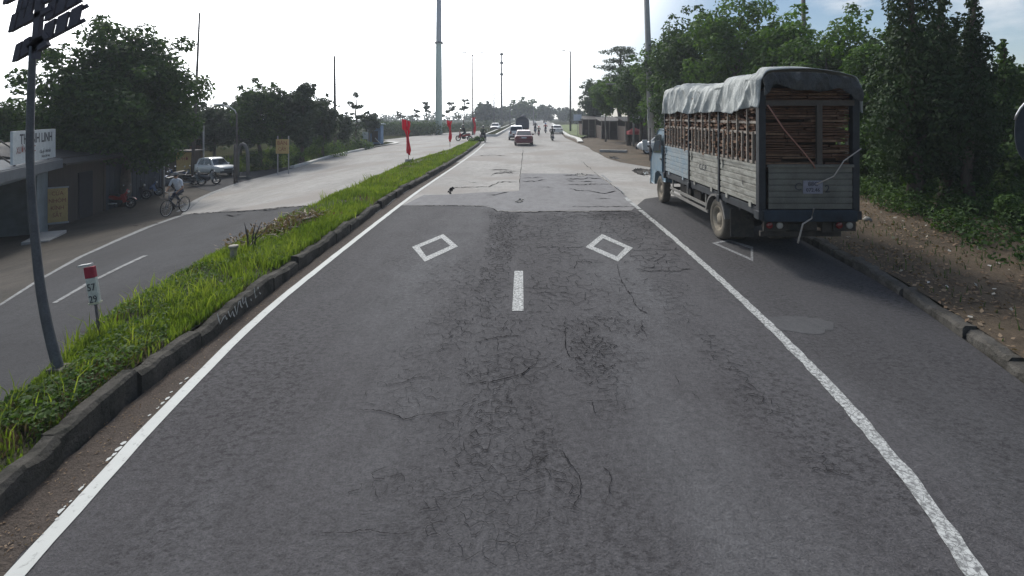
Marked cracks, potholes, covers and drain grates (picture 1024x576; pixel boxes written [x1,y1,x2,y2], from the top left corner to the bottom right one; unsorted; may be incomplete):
crack [324,153,785,566]
